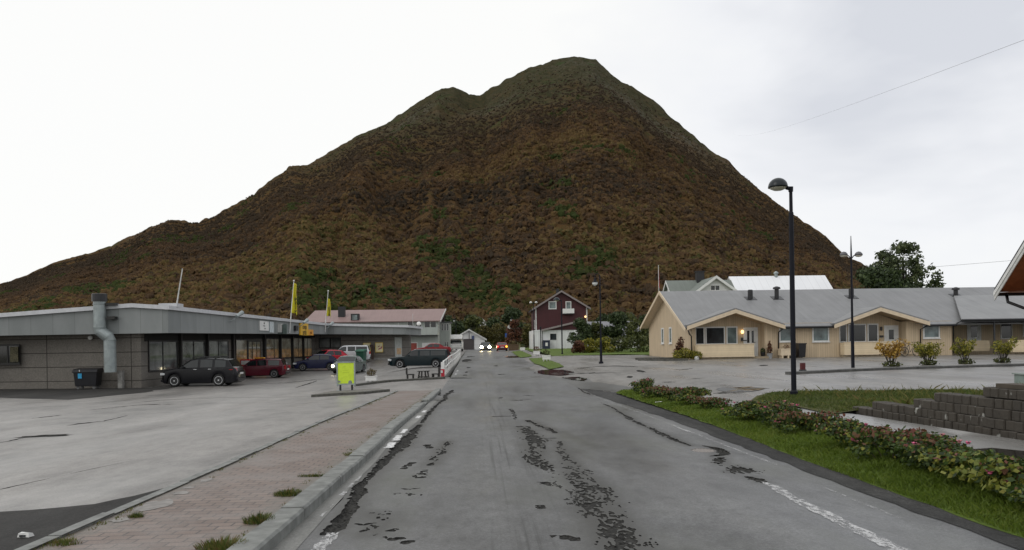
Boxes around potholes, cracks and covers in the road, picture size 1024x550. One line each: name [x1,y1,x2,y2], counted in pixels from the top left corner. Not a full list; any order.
crack [509,395,658,550]
pothole [703,445,731,466]
